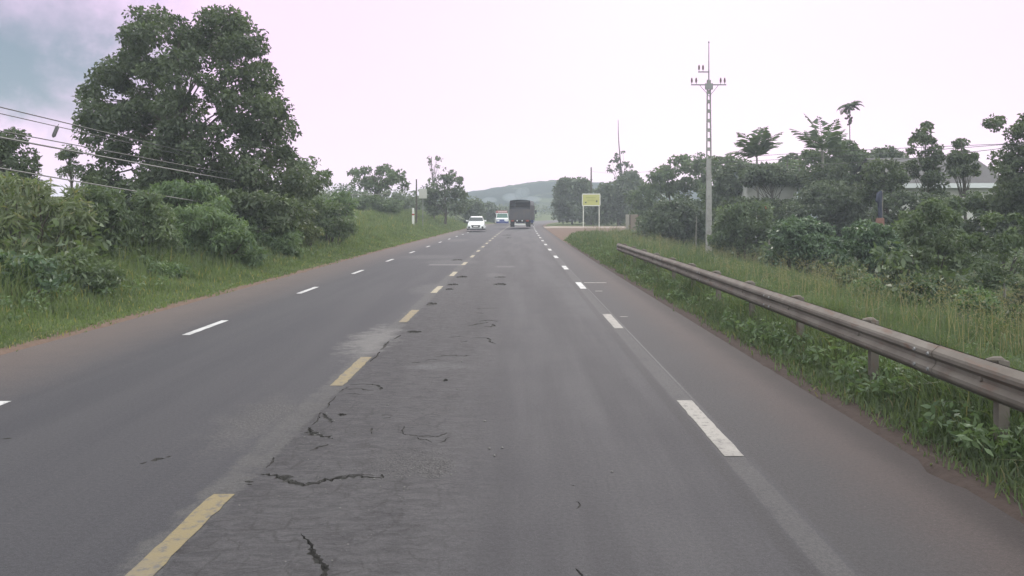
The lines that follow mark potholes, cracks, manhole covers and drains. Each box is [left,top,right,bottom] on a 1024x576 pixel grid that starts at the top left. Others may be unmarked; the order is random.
crack [301,534,330,576]
crack [370,415,446,443]
crack [245,457,384,487]
crack [413,308,496,363]
crack [305,384,383,451]
